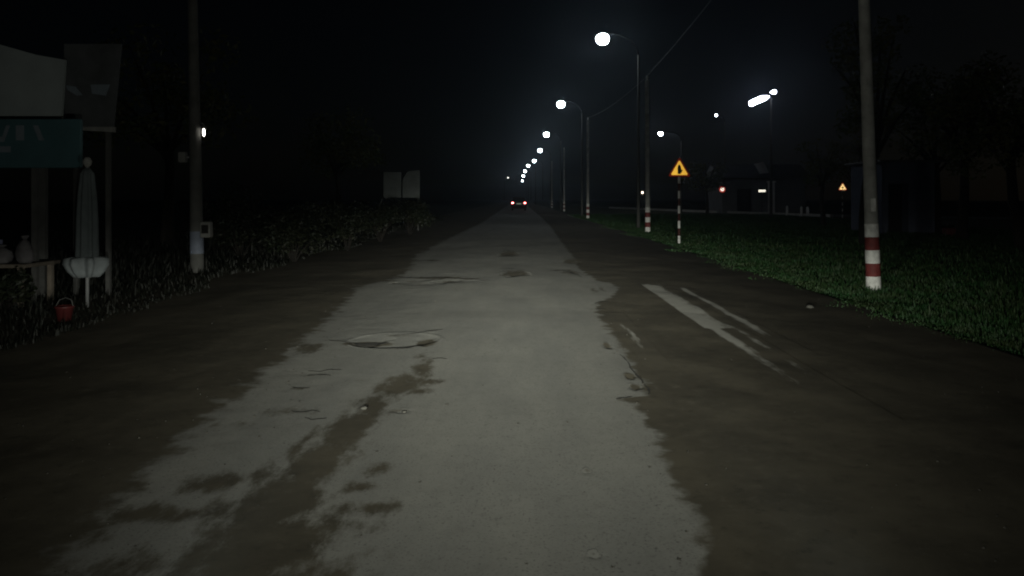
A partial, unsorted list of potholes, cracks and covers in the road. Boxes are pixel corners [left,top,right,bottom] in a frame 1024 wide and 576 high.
pothole [498,269,533,278]
crack [618,356,650,399]
